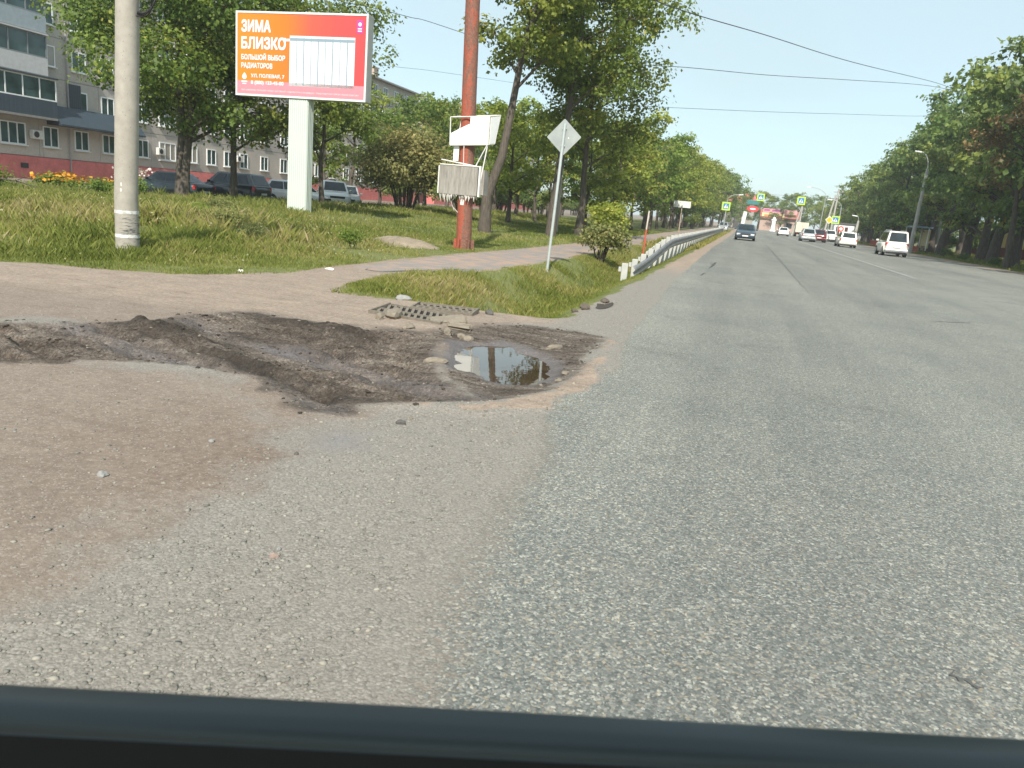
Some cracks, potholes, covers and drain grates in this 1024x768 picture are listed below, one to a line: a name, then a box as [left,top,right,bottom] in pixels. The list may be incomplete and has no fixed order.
pothole [0,311,471,418]
crack [945,668,984,689]
drain grate [410,301,480,316]
drain grate [368,302,459,325]
